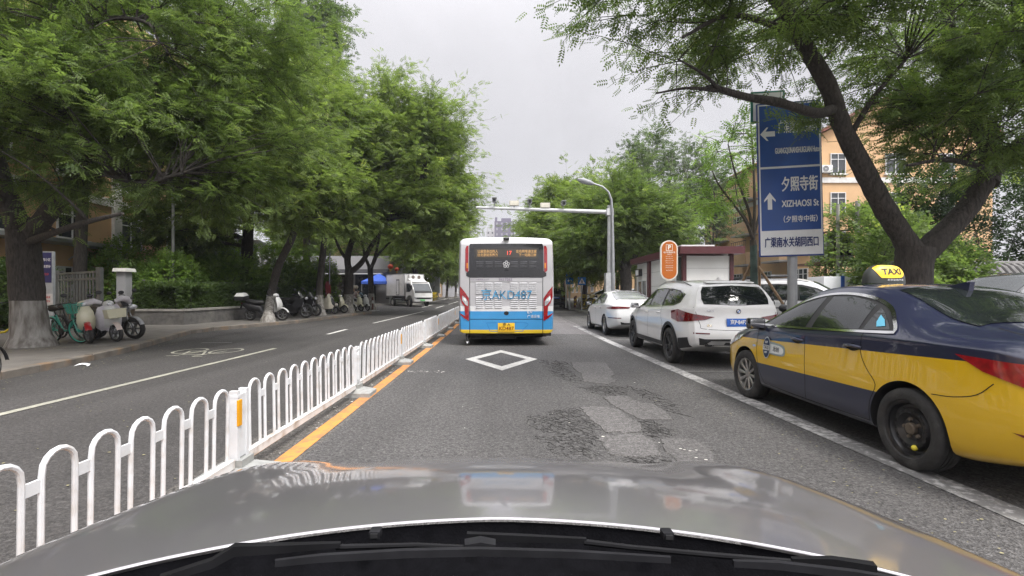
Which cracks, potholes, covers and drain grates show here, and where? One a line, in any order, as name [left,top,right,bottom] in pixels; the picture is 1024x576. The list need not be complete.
crack [540,360,690,438]
